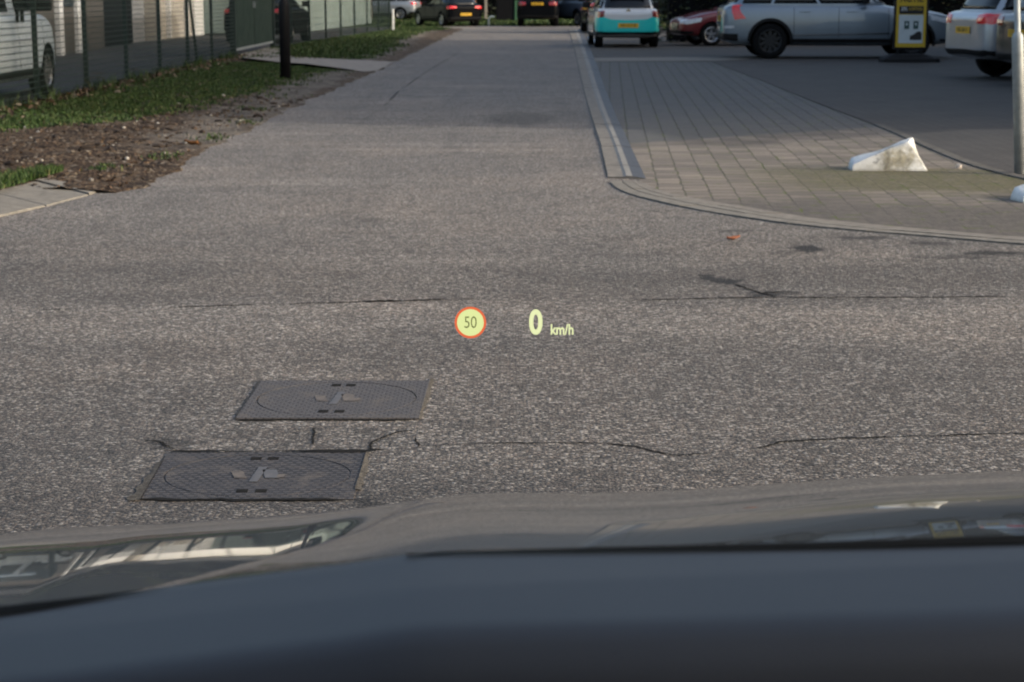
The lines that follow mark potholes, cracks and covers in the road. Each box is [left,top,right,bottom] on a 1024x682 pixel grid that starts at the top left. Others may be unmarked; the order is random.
manhole cover [234,378,434,421]
manhole cover [127,449,376,501]
crack [43,284,987,310]
crack [368,429,700,455]
crack [757,433,1024,448]
